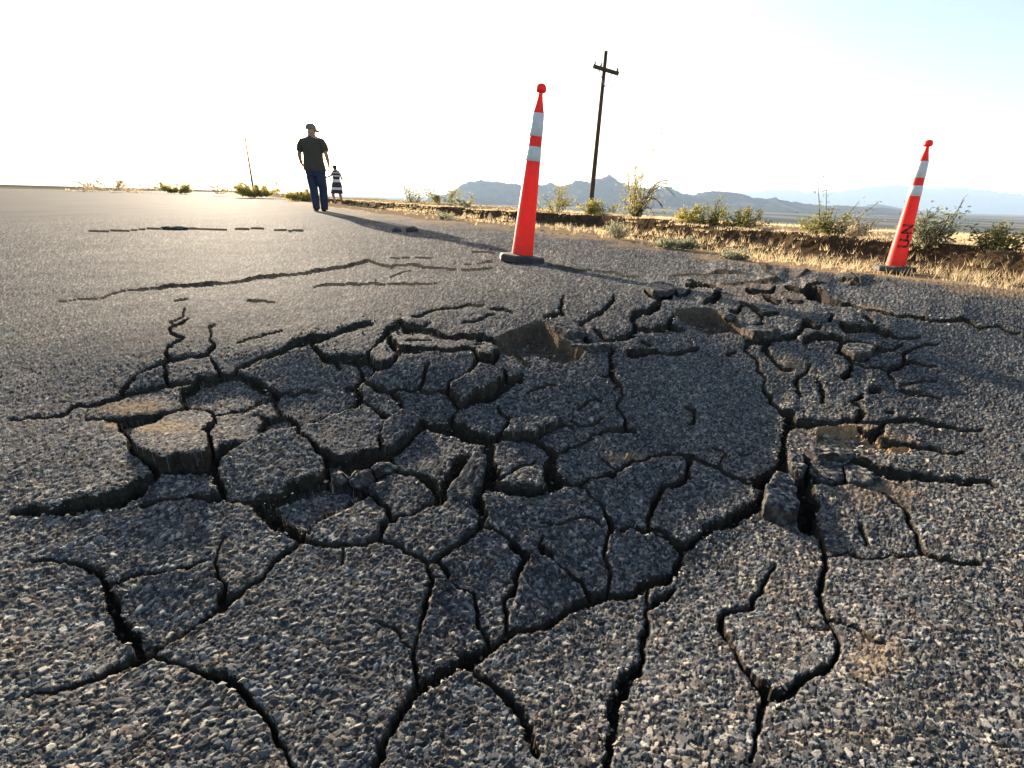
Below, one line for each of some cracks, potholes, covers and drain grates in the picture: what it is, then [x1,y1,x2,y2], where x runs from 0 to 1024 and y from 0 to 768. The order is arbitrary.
pothole [496,321,585,364]
pothole [815,424,910,456]
crack [7,251,1022,768]
